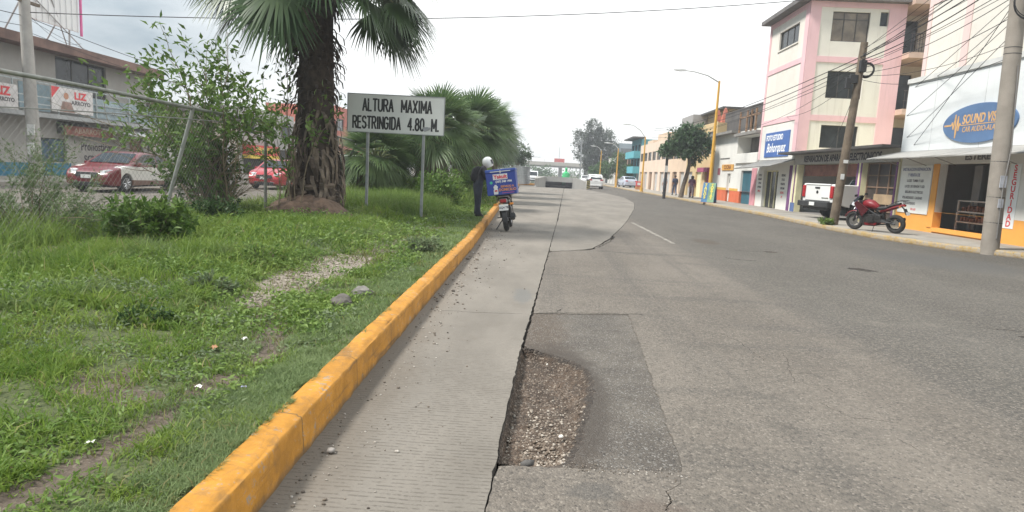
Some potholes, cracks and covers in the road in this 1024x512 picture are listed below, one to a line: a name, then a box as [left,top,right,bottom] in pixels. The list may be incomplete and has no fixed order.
pothole [497,347,597,467]
crack [522,212,660,347]
